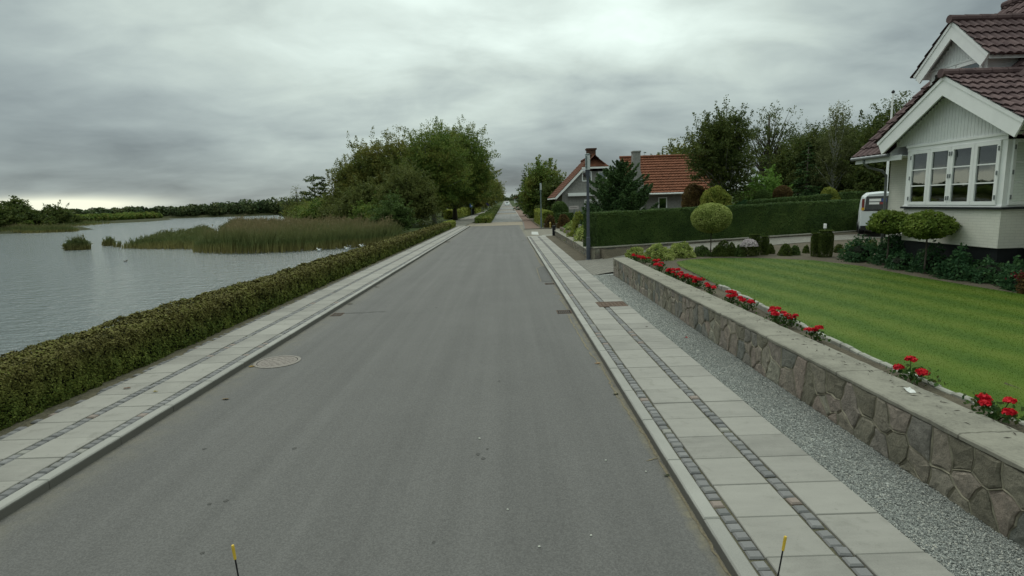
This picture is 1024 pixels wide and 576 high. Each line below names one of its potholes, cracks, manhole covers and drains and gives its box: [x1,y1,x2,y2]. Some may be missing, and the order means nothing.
manhole cover [253,355,301,368]
